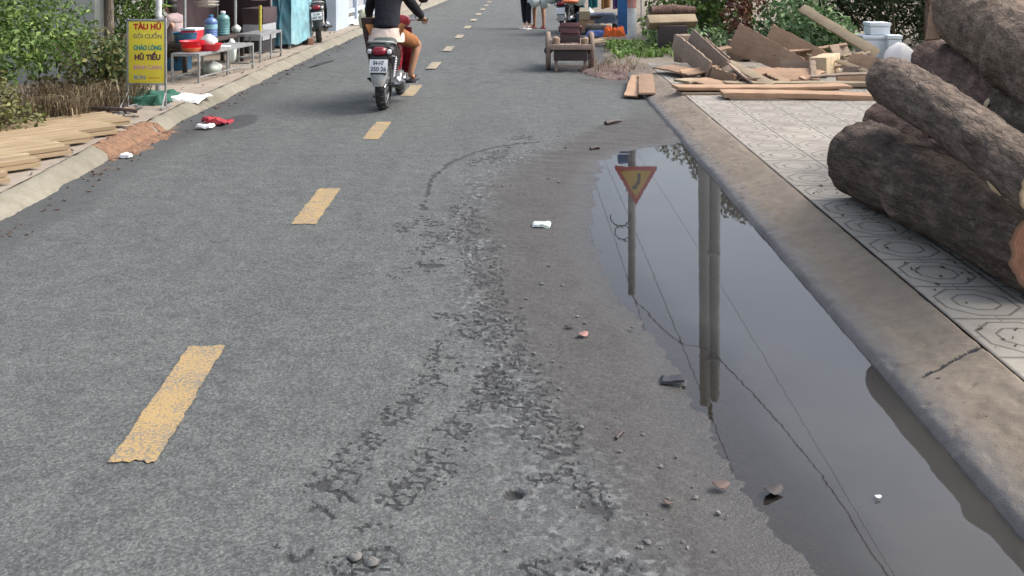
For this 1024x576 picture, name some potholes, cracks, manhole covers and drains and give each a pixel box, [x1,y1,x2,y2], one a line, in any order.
crack [272,135,614,576]
crack [516,555,642,576]
pothole [503,490,523,501]
